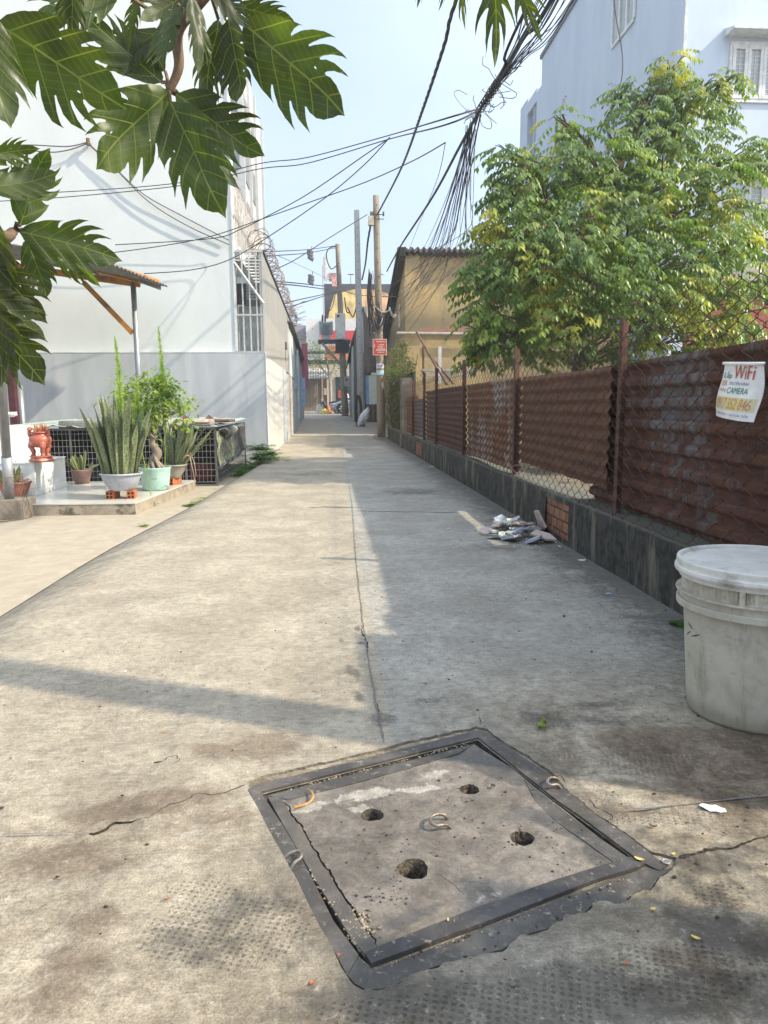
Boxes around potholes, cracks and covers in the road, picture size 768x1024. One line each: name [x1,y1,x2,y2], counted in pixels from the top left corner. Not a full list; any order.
crack [678,835,768,859]
crack [89,784,246,835]
manhole cover [248,726,676,990]
